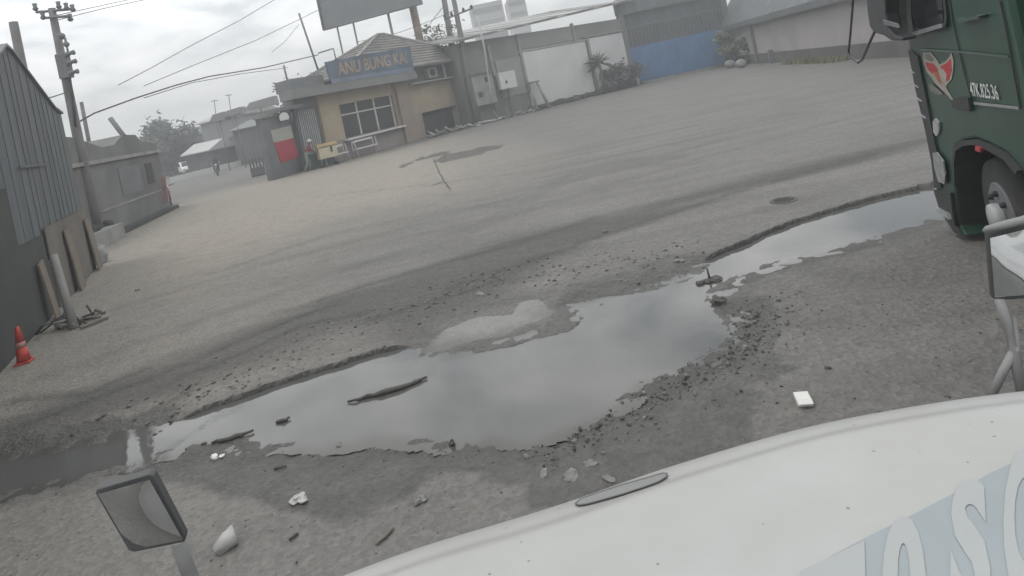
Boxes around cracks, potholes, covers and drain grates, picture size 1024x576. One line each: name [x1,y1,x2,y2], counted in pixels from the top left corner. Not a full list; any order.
manhole cover [769,196,798,204]
pothole [0,181,947,506]
